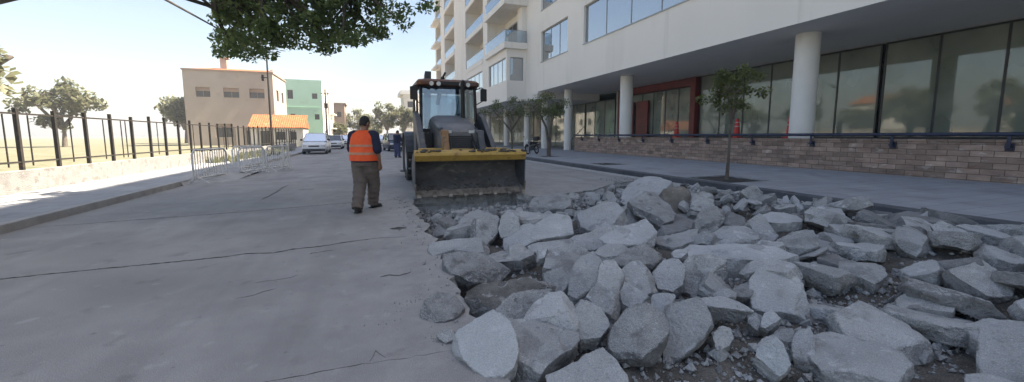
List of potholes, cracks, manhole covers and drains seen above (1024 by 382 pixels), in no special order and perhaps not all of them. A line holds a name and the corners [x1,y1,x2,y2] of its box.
crack [60,176,383,226]
crack [0,236,406,280]
crack [267,350,444,382]
